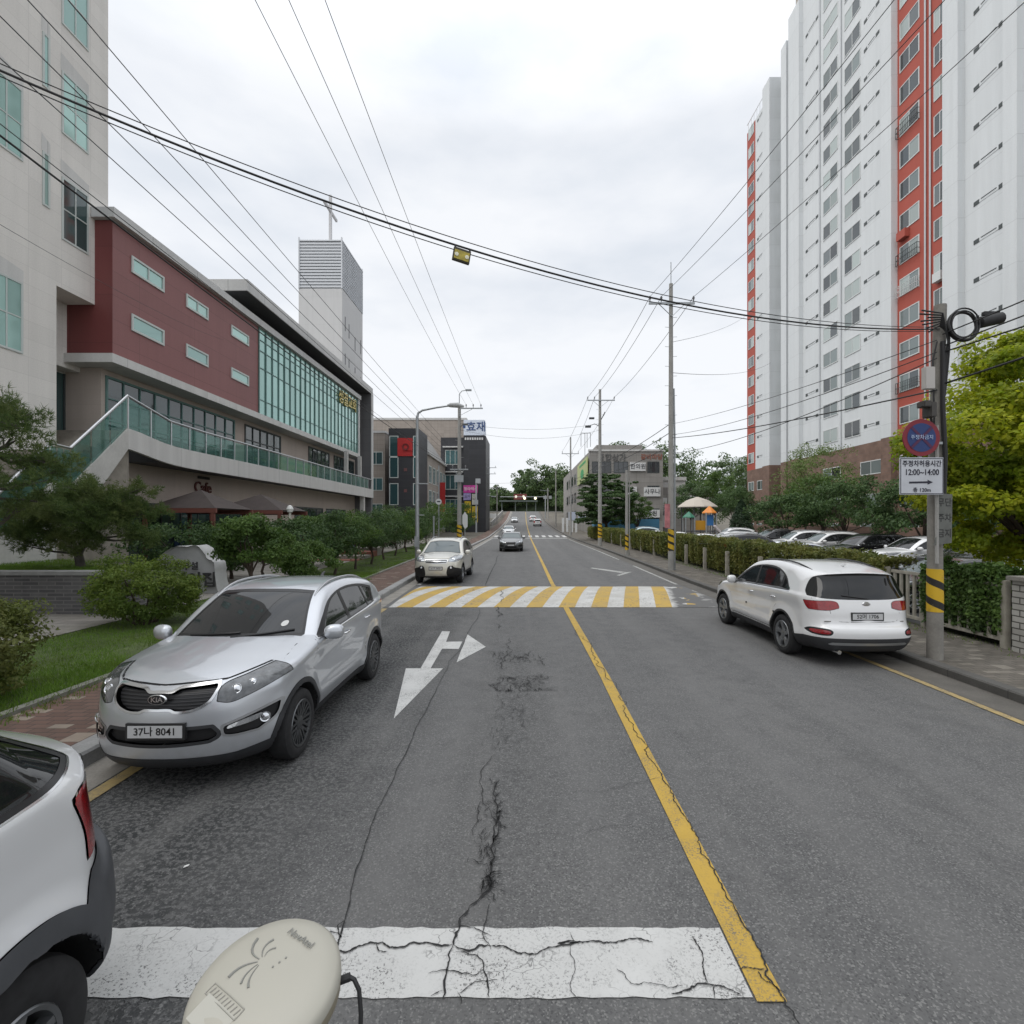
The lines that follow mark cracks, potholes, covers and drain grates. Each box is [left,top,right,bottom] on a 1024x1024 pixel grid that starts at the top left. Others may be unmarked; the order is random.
crack [339,589,652,1003]
